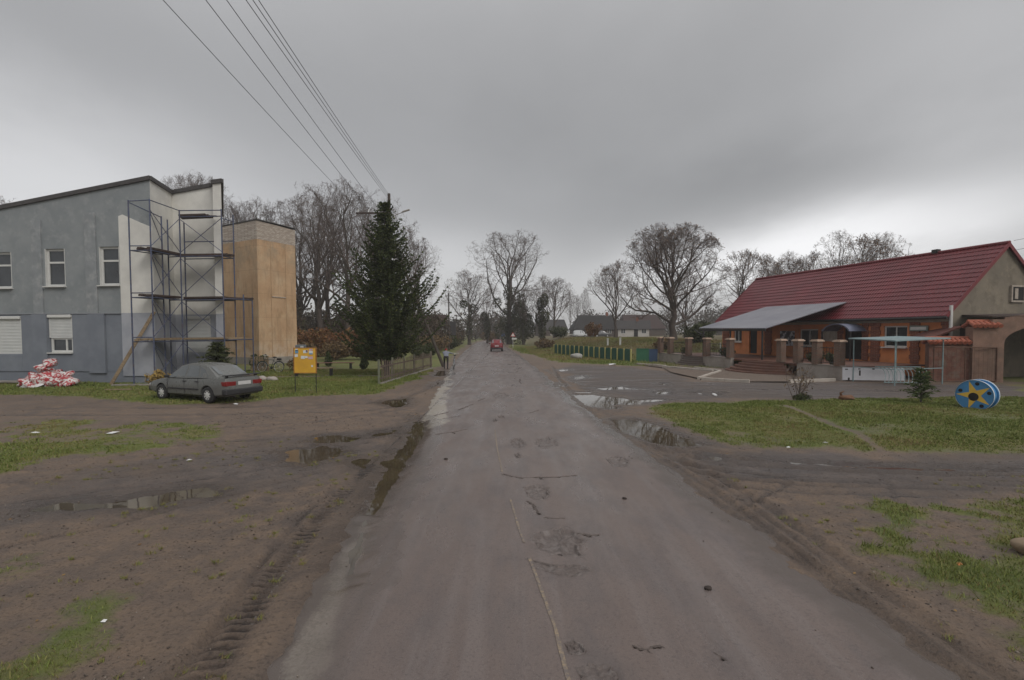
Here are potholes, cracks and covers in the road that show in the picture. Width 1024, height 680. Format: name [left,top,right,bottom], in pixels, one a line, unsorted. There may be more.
pothole [529,526,589,559]
pothole [564,639,586,655]
pothole [524,558,593,577]
pothole [605,456,631,467]
pothole [510,437,526,450]
pothole [534,436,559,449]
crack [526,501,599,537]
pothole [523,484,550,500]
